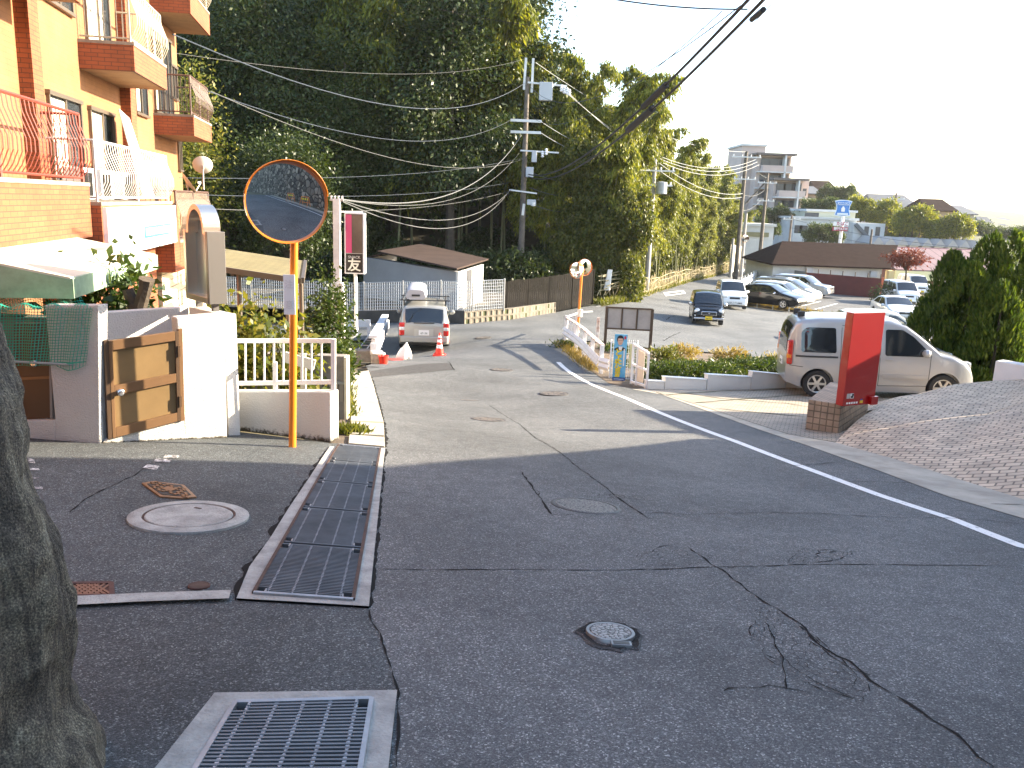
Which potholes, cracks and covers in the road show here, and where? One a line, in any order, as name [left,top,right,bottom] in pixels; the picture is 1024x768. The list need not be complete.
crack [636,545,710,566]
manhole cover [586,622,635,649]
manhole cover [188,581,210,590]
drain grate [237,444,385,606]
crack [70,468,144,512]
manhole cover [551,497,621,514]
drain grate [155,690,397,768]
crack [723,608,882,701]
crack [522,472,575,515]
crack [792,548,852,562]
manhole cover [126,500,249,535]
